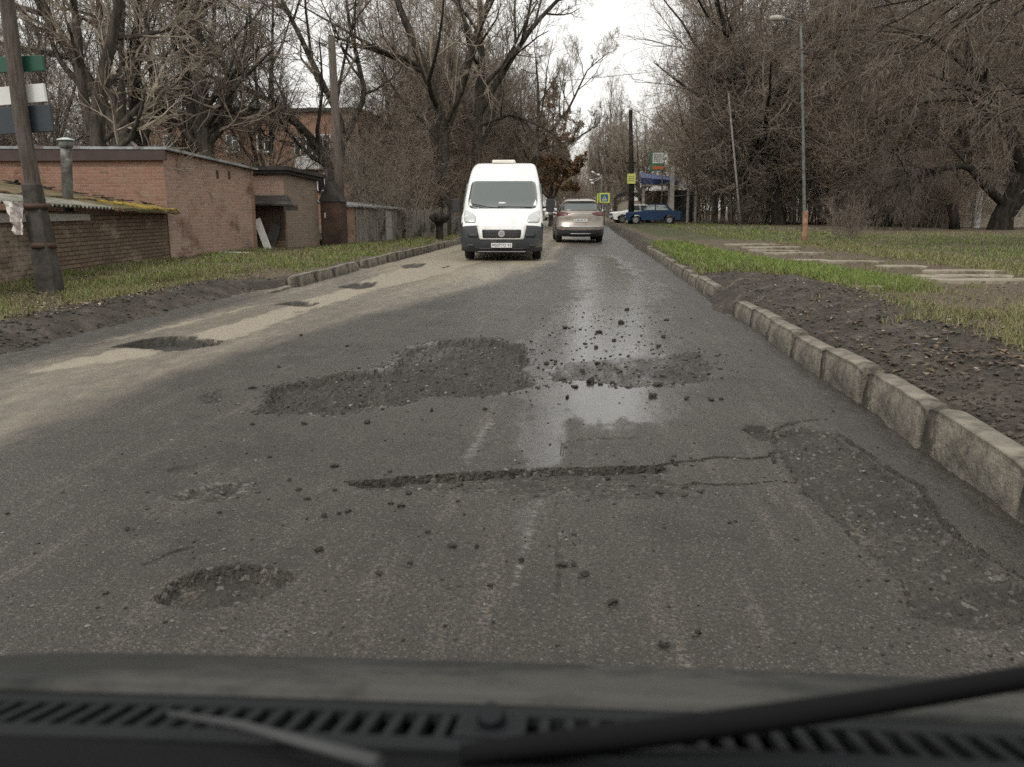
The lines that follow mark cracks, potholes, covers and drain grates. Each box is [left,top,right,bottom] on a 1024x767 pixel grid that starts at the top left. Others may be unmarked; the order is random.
pothole [336,282,378,290]
pothole [543,352,715,388]
pothole [243,337,543,417]
crack [659,418,820,489]
pothole [109,336,224,352]
pothole [166,482,250,503]
pothole [153,563,301,610]
